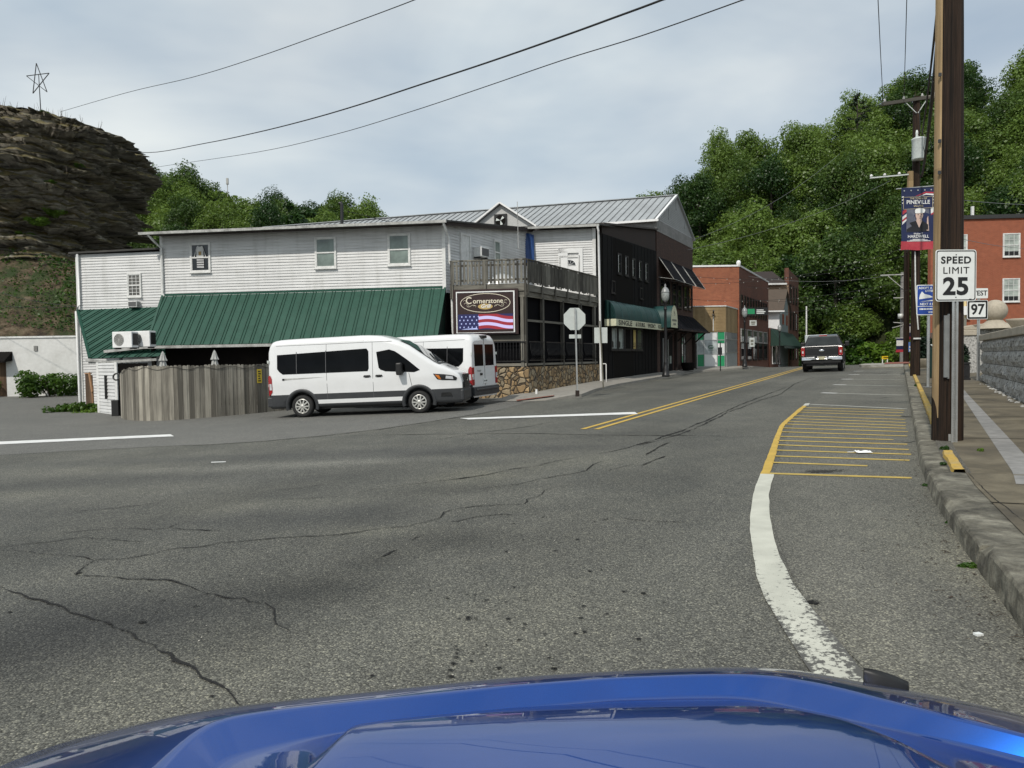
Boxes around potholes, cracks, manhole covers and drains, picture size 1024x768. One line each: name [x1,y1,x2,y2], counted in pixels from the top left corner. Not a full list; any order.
crack [0,382,799,706]
